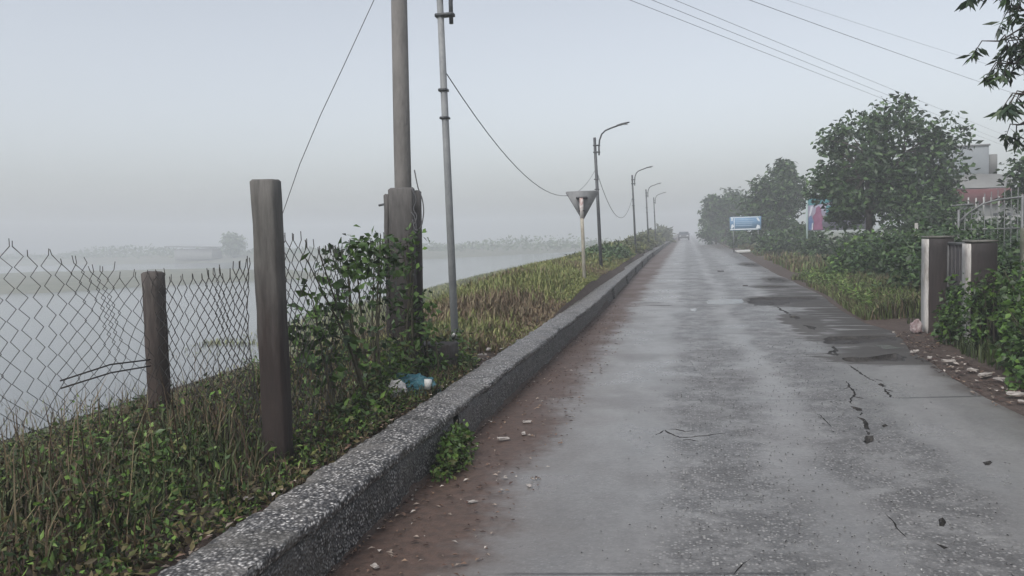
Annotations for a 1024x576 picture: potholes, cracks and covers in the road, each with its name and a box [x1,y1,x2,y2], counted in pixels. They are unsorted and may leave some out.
crack [656,429,727,441]
crack [820,346,899,435]
